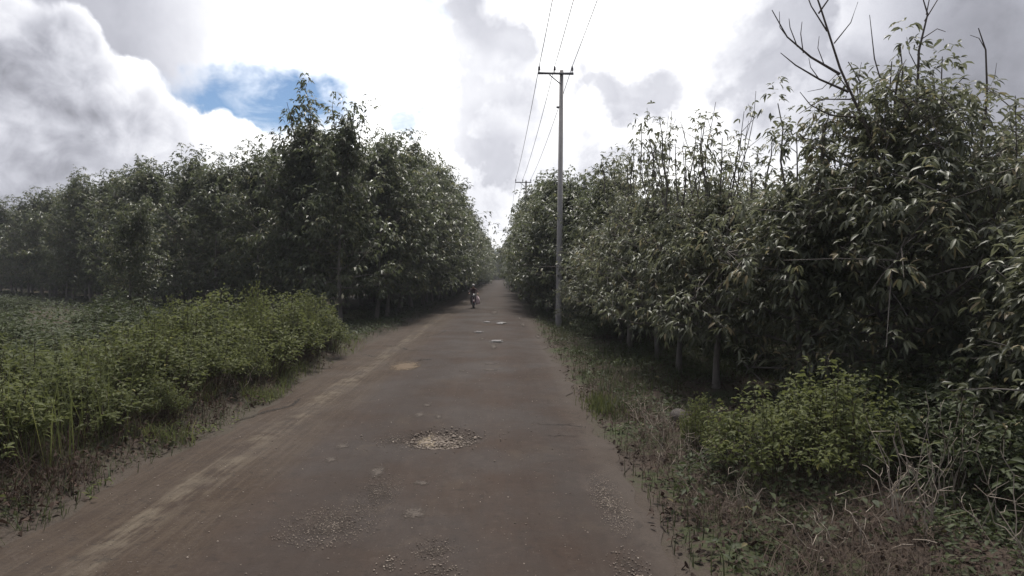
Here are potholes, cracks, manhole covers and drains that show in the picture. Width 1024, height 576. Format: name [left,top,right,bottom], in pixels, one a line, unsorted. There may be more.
pothole [360,417,553,462]
